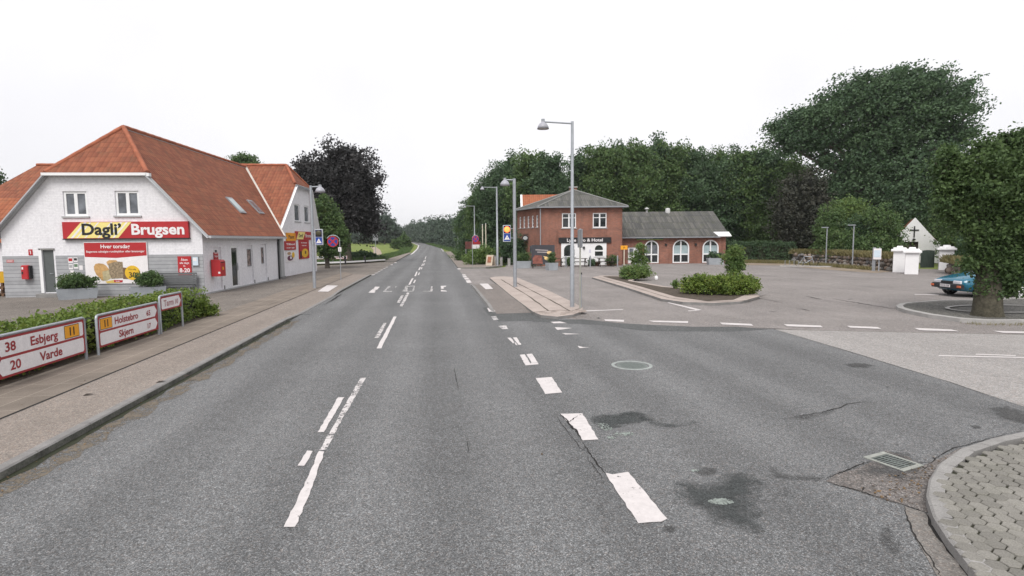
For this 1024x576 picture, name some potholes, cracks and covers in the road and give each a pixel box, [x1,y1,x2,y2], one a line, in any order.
manhole cover [611,361,653,370]
crack [557,414,605,477]
drain grate [863,452,924,472]
